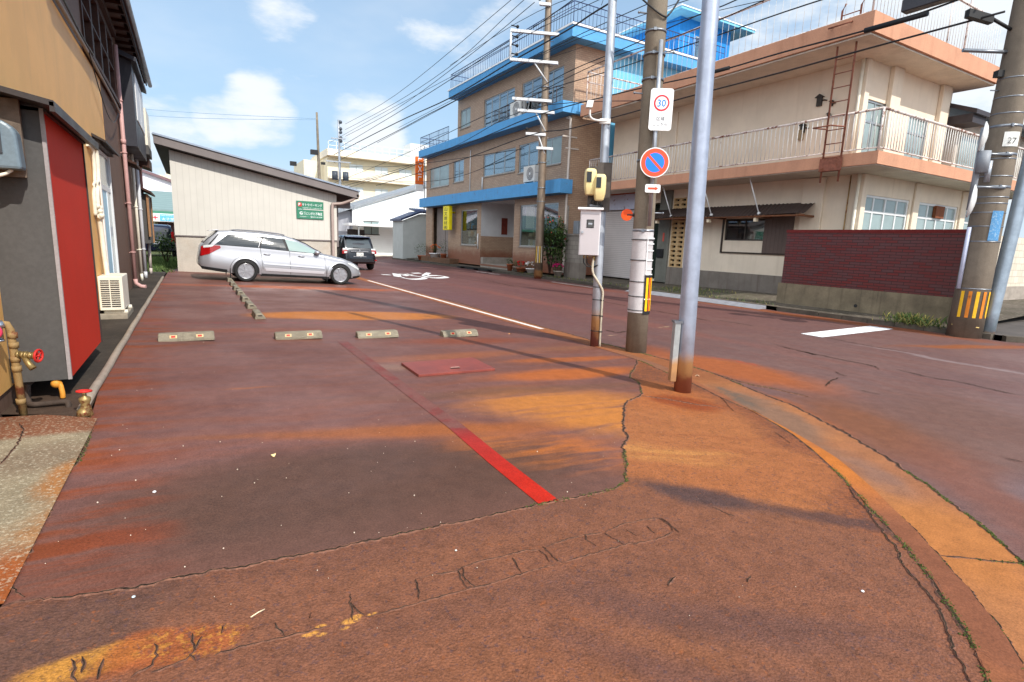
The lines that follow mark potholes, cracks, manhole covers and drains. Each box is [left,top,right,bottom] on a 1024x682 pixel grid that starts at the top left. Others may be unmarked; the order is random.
manhole cover [401,357,495,377]
crack [0,298,1024,682]
